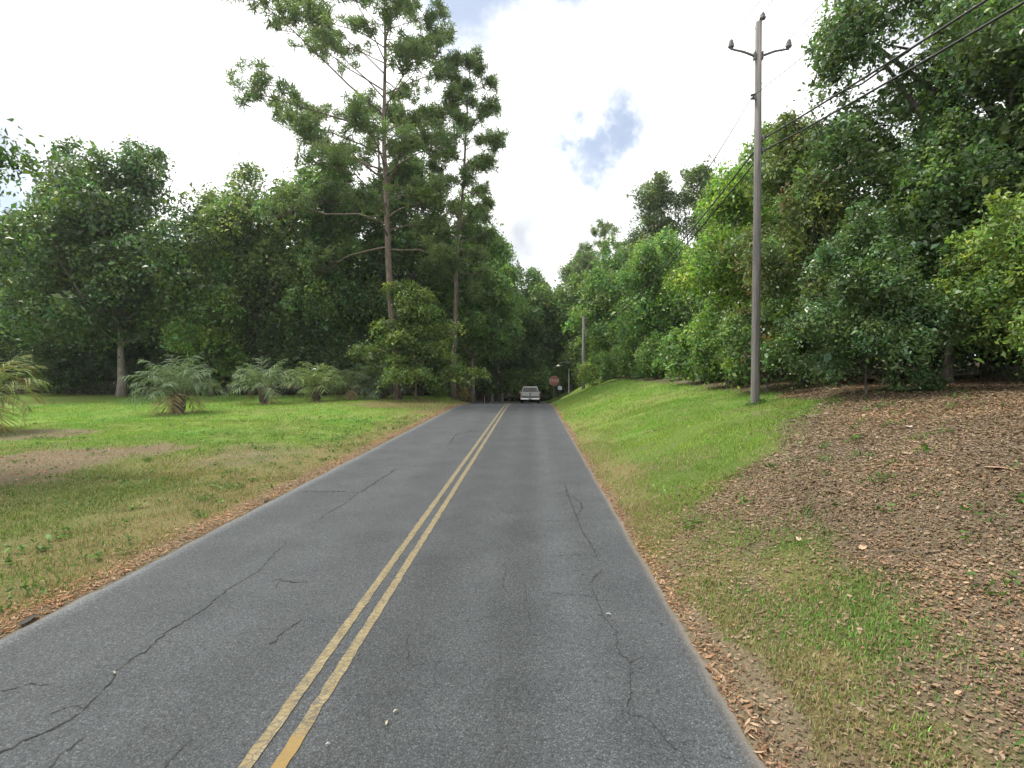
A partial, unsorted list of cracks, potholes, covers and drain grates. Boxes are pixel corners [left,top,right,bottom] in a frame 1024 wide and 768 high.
crack [502,560,531,625]
crack [304,469,397,523]
crack [544,458,690,763]
crack [0,542,307,768]
